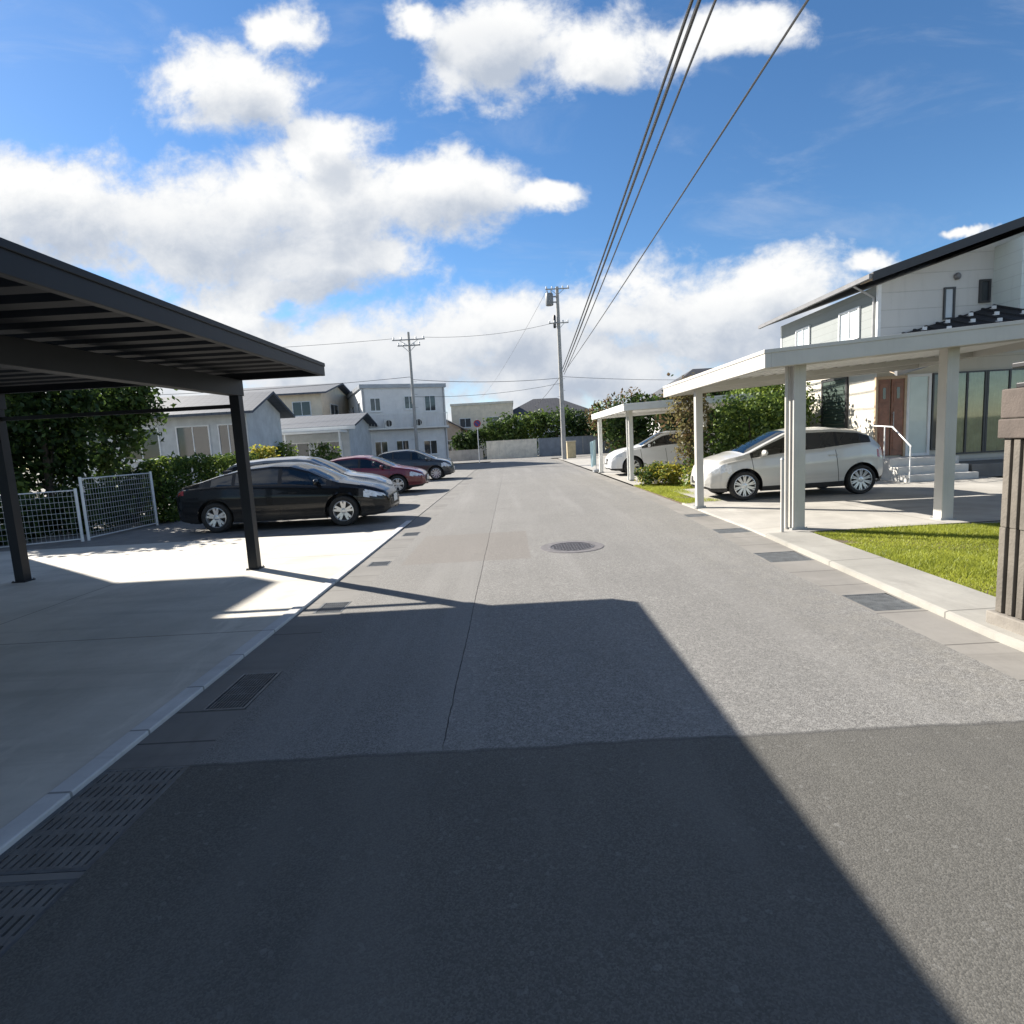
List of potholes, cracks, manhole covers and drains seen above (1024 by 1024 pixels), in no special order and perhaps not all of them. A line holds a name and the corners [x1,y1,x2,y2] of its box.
drain grate [753,551,814,562]
drain grate [842,593,920,611]
drain grate [313,602,351,614]
drain grate [0,765,190,876]
drain grate [201,671,282,711]
manhole cover [540,541,604,553]
